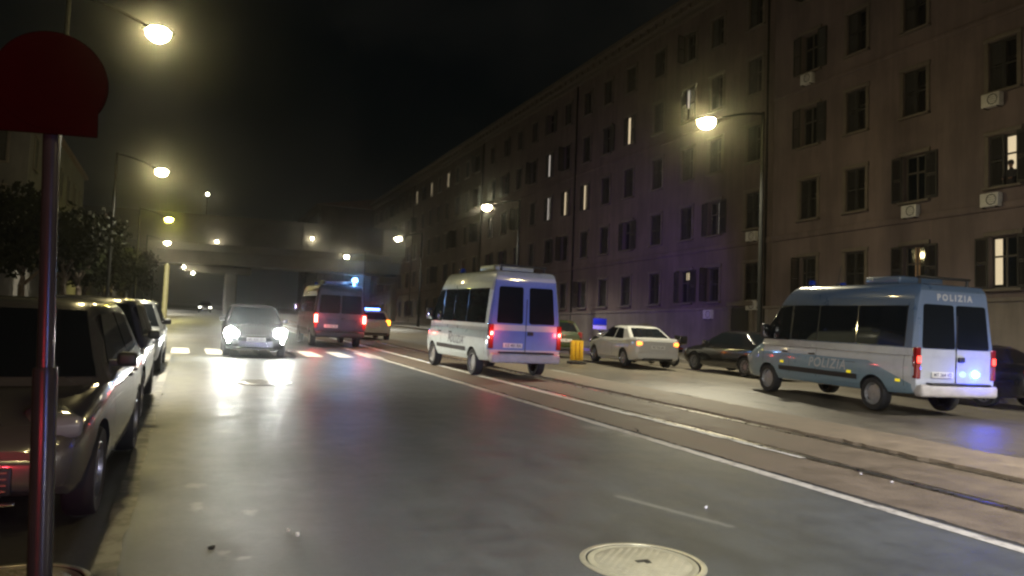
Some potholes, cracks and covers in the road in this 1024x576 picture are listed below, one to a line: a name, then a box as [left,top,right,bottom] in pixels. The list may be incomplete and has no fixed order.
manhole cover [579,542,708,576]
